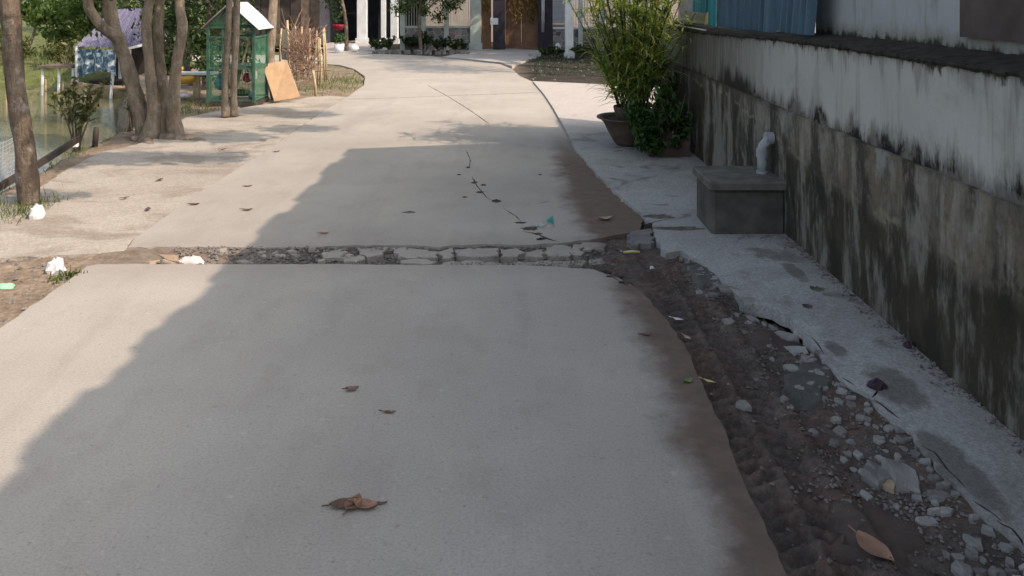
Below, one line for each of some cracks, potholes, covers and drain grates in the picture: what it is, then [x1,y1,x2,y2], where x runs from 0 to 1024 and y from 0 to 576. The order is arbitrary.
crack [872,391,897,417]
crack [71,151,628,286]
crack [922,445,1023,545]
